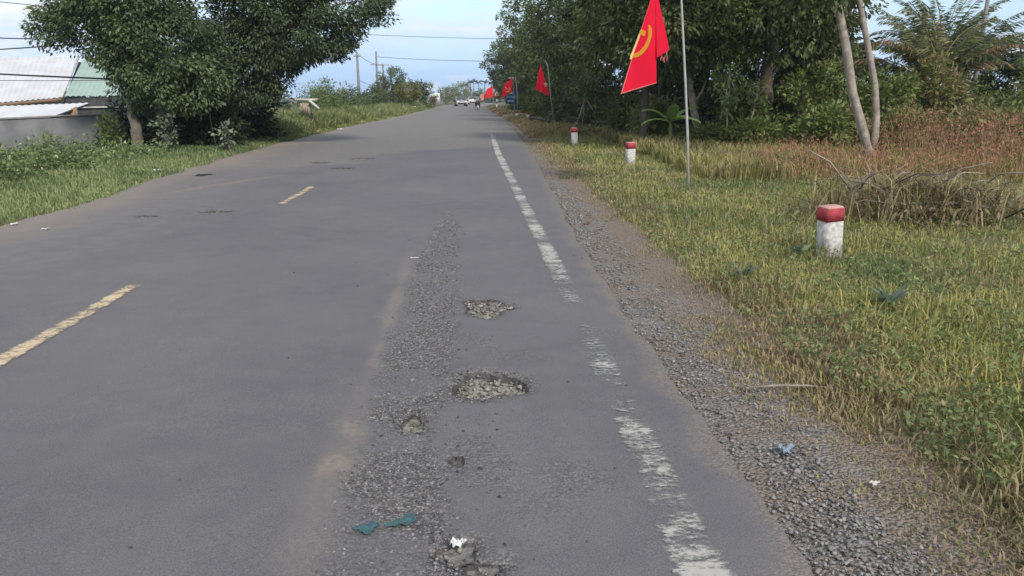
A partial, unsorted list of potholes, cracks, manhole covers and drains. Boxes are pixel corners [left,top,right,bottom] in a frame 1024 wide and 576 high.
pothole [451,373,529,401]
pothole [432,542,477,570]
pothole [463,300,514,319]
pothole [401,416,425,433]
pothole [462,564,501,576]
pothole [449,456,465,468]
